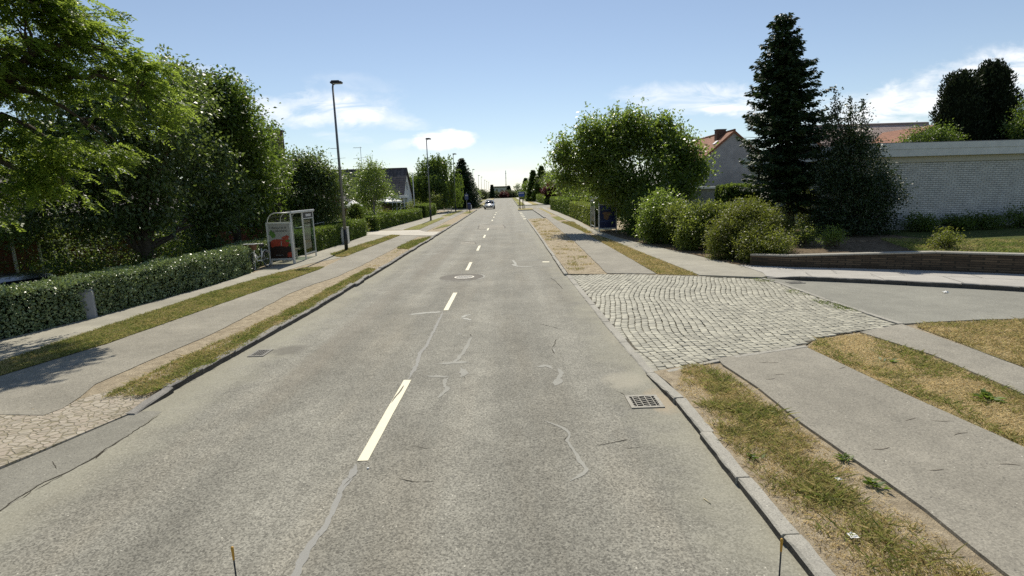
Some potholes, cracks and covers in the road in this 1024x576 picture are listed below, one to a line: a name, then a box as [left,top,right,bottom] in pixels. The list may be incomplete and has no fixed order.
drain grate [247,349,273,357]
drain grate [625,394,665,409]
